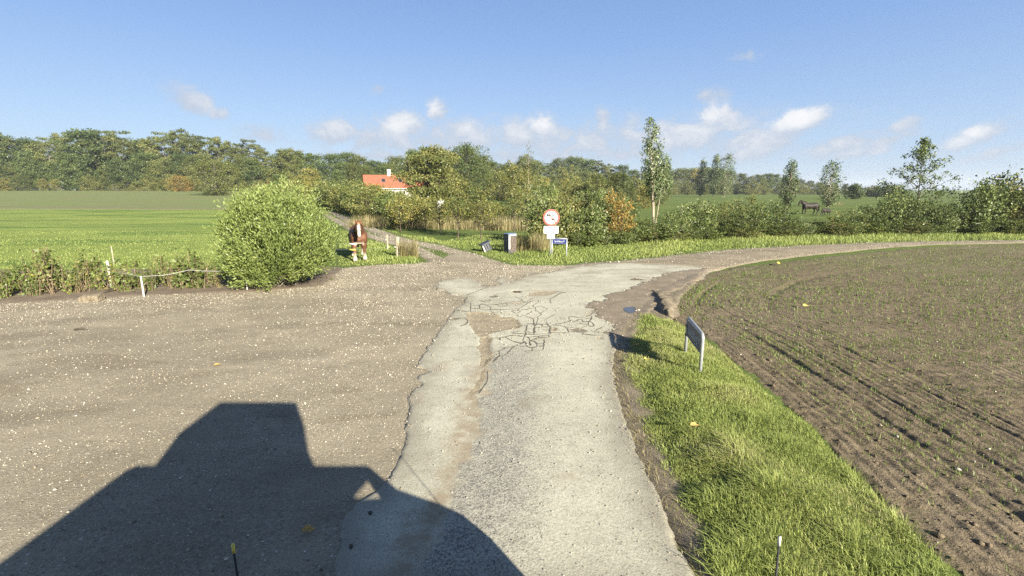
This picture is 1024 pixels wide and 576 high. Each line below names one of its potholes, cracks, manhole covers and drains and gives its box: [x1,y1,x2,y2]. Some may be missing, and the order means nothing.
crack [454,273,604,362]
